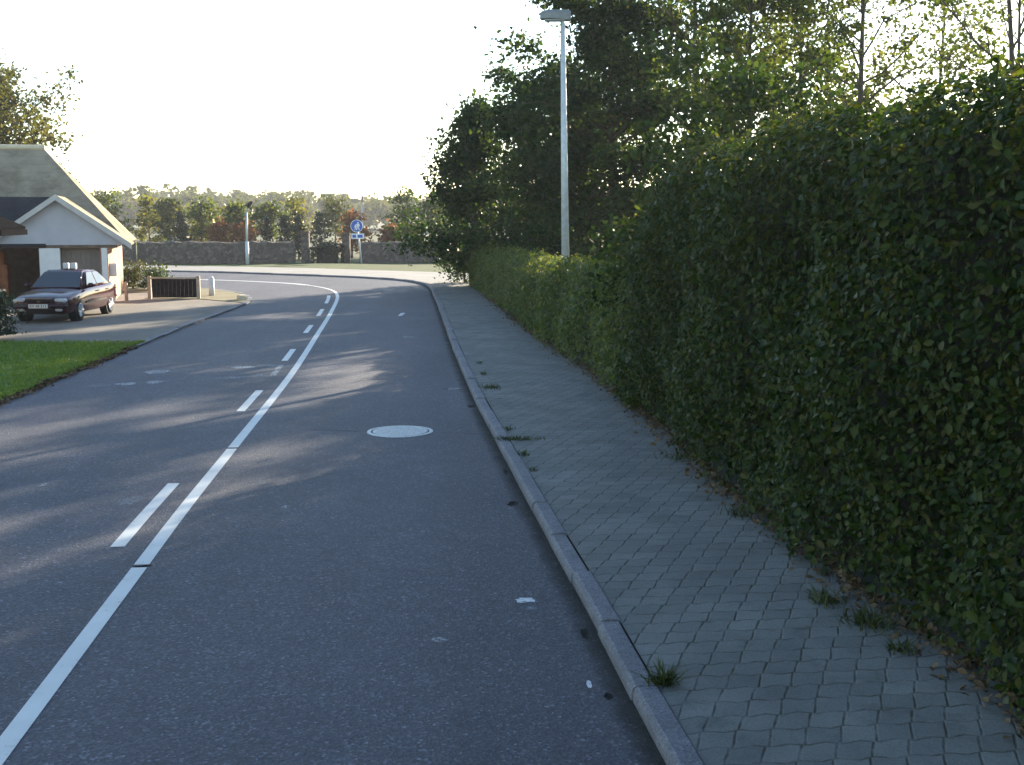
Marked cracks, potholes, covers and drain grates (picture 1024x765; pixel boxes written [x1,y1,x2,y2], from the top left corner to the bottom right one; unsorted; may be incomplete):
manhole cover [367,425,433,438]
